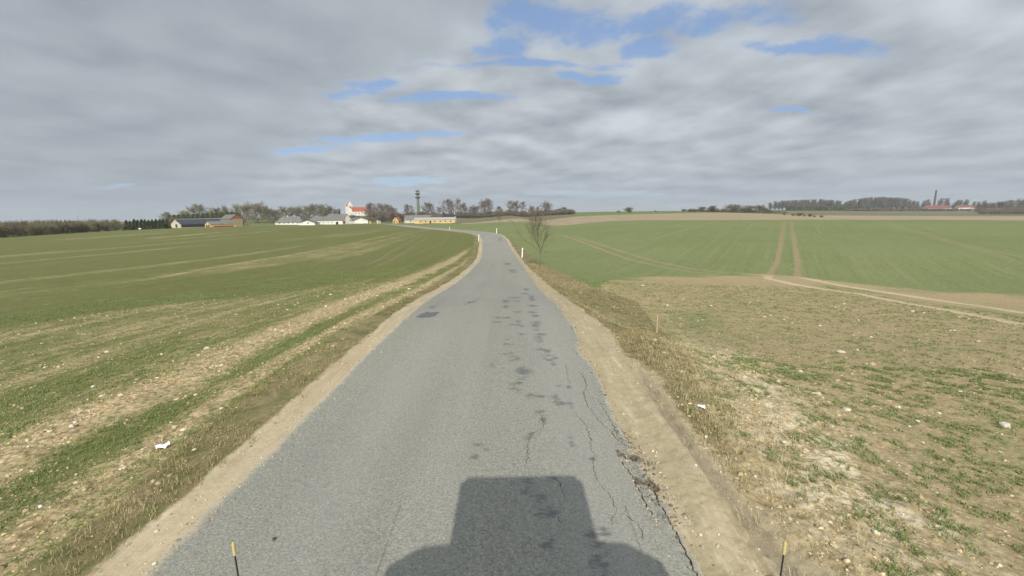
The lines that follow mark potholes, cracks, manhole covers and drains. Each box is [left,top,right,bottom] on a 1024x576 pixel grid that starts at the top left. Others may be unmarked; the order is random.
pothole [632,473,661,492]
pothole [614,449,643,461]
crack [565,364,698,576]
